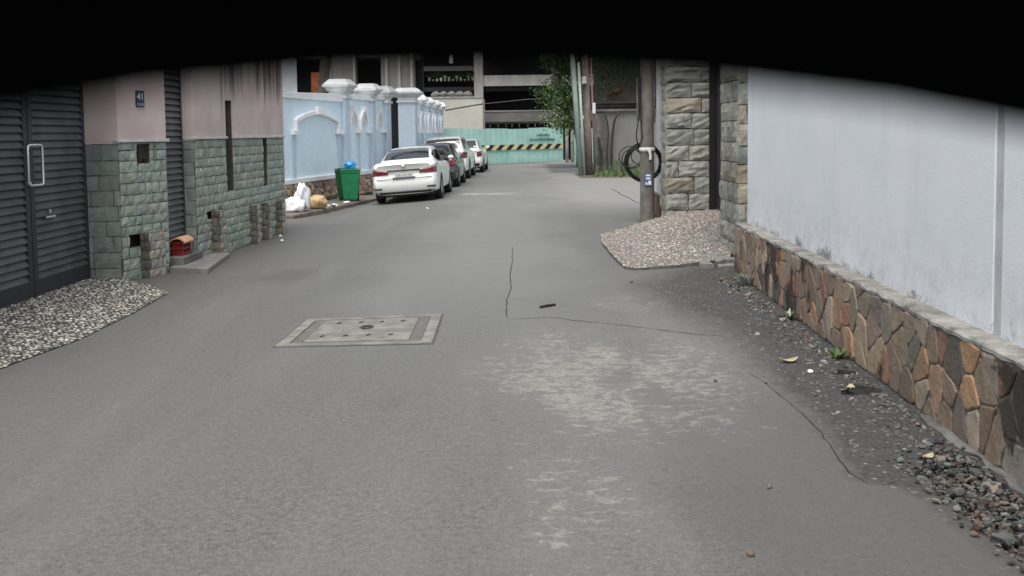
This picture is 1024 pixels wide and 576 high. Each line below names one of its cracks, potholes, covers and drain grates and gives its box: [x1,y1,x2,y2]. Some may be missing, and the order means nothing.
crack [740,367,914,485]
crack [506,247,719,336]
manhole cover [272,314,444,348]
